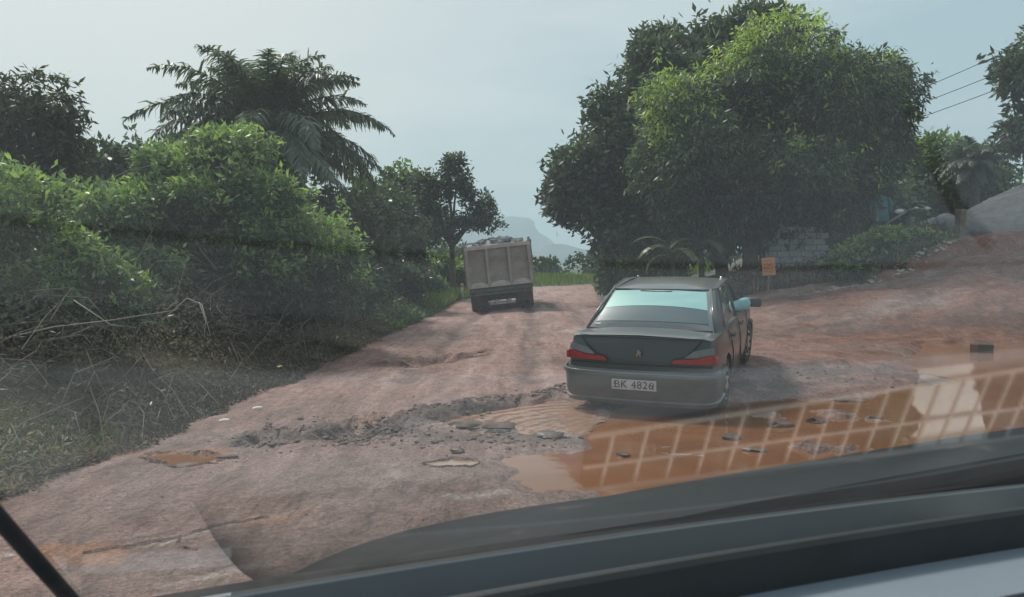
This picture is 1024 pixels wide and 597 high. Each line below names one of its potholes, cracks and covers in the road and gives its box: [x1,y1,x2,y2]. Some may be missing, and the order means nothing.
pothole [422,456,480,468]
pothole [408,390,615,438]
pothole [302,409,415,447]
crack [83,515,270,554]
pothole [138,449,229,468]
pothole [371,350,490,368]
